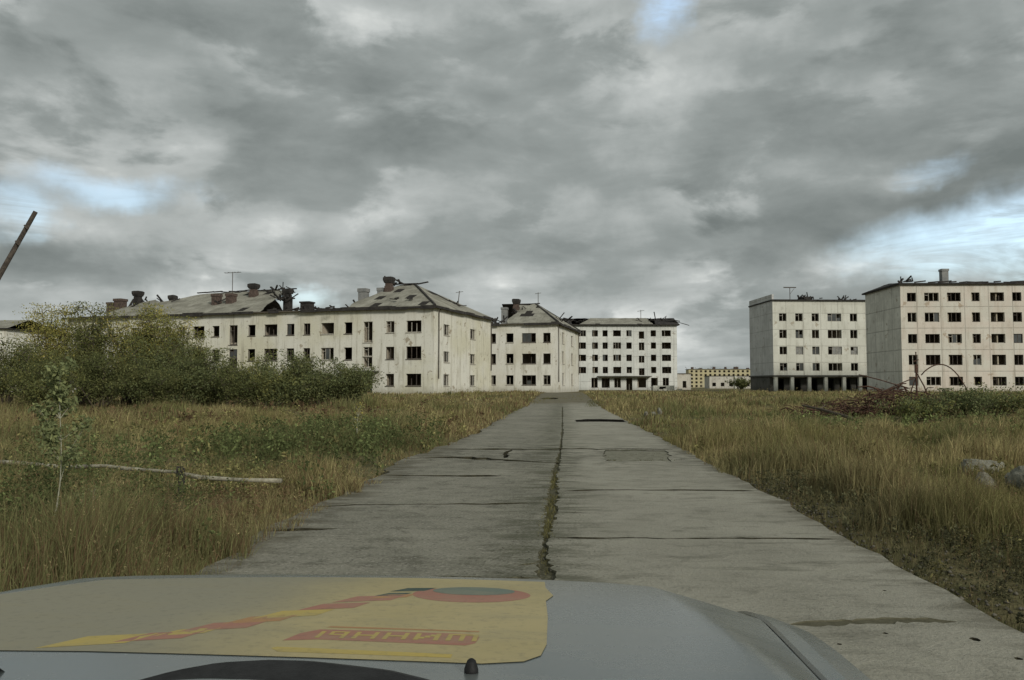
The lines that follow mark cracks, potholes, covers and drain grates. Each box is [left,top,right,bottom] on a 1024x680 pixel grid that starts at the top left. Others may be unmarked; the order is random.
crack [315,407,827,580]
